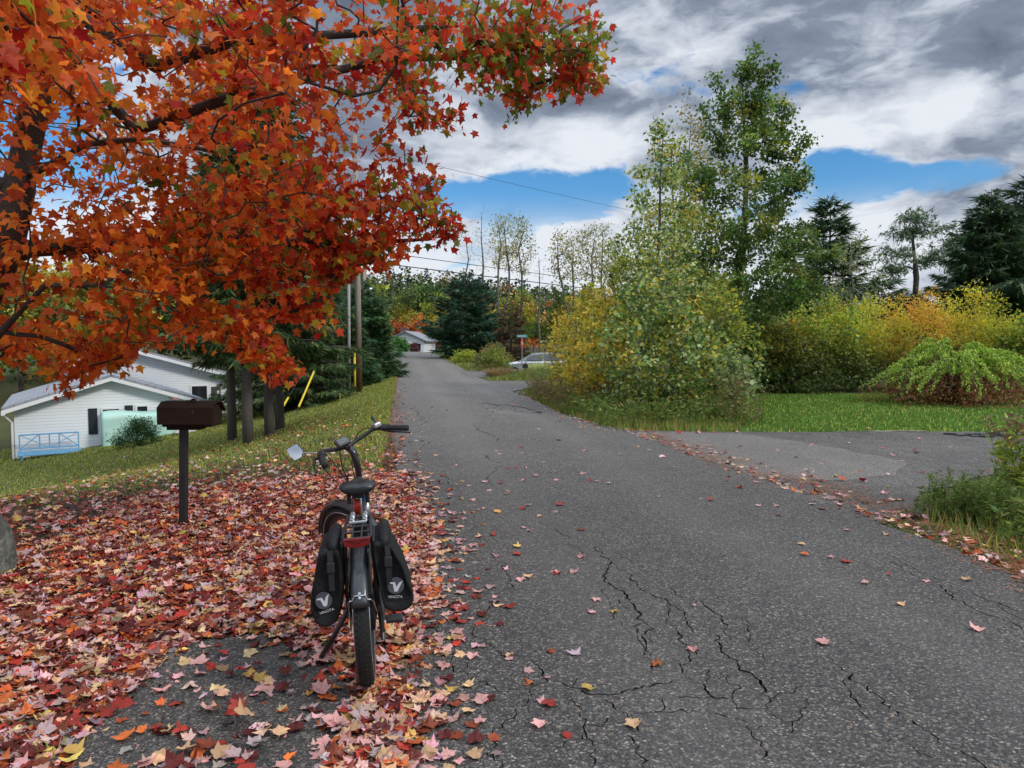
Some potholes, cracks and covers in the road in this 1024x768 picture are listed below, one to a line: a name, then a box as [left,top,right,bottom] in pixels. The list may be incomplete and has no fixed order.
crack [546,548,823,767]
crack [830,658,986,768]
crack [890,560,1023,630]
